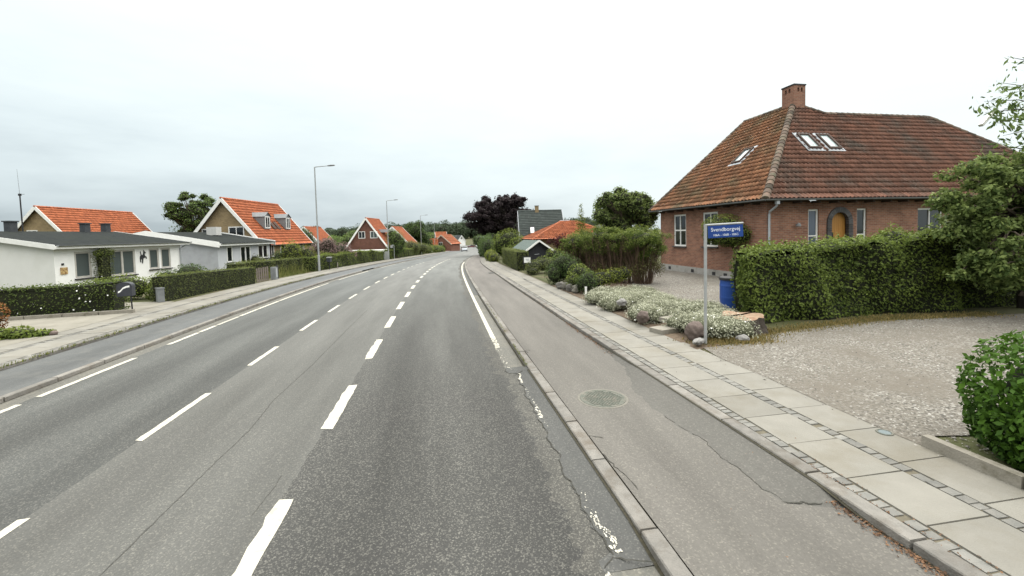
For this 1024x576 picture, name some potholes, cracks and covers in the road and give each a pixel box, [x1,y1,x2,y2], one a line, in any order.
crack [665,416,822,504]
manhole cover [577,389,629,409]
crack [505,369,656,568]
